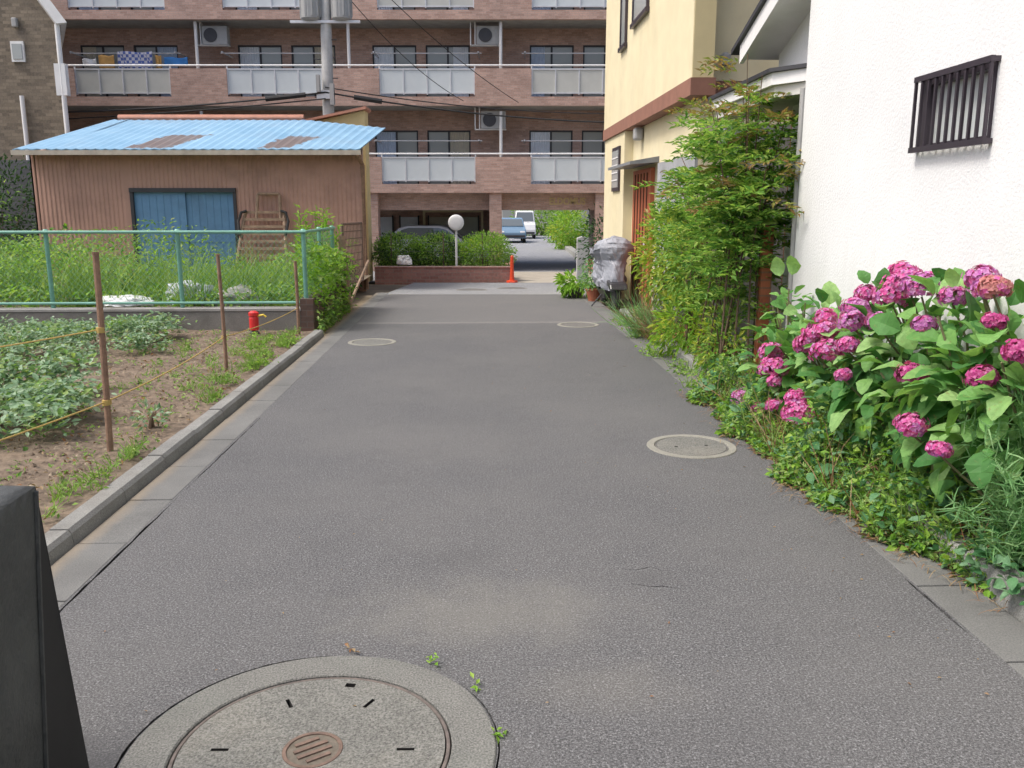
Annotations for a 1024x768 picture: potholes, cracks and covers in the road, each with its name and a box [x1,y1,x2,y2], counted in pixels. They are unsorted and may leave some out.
manhole cover [348,338,396,346]
manhole cover [119,656,497,768]
manhole cover [647,434,737,459]
